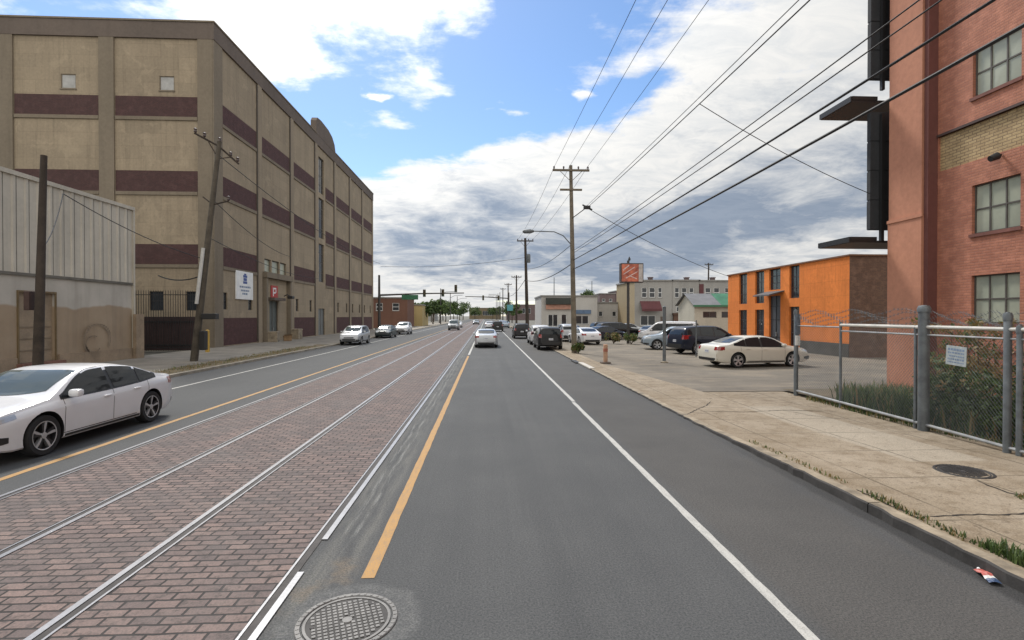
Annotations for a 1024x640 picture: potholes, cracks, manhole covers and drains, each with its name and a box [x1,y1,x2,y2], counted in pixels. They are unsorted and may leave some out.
manhole cover [932,464,997,479]
manhole cover [294,593,398,640]
